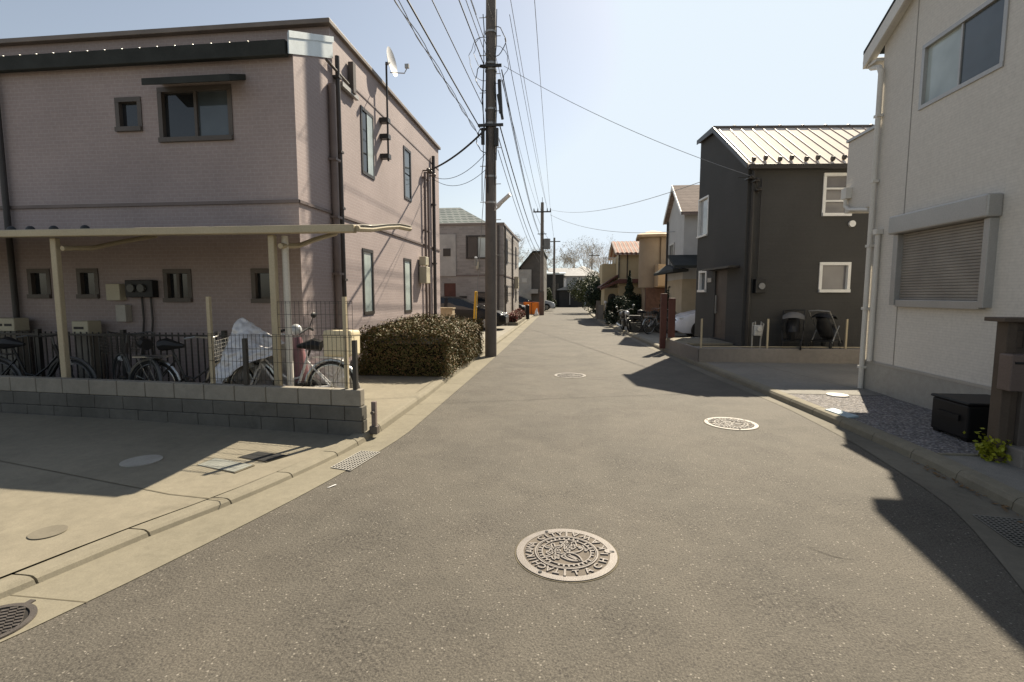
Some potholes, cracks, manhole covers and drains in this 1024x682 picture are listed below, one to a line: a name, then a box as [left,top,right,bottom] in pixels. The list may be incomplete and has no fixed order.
drain grate [331,451,380,471]
manhole cover [515,529,619,583]
manhole cover [703,417,760,431]
drain grate [973,514,1024,547]
